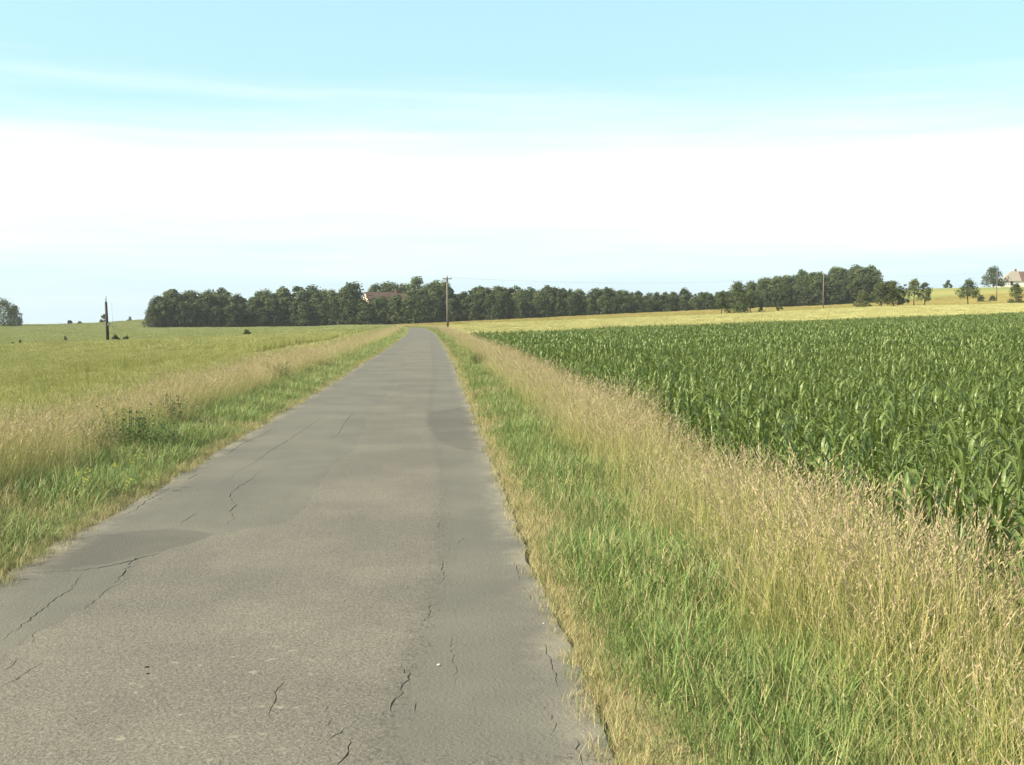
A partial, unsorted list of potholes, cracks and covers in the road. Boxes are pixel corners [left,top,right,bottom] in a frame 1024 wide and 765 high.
crack [325,707,352,765]
crack [0,558,135,643]
crack [390,665,417,715]
crack [218,412,354,527]
